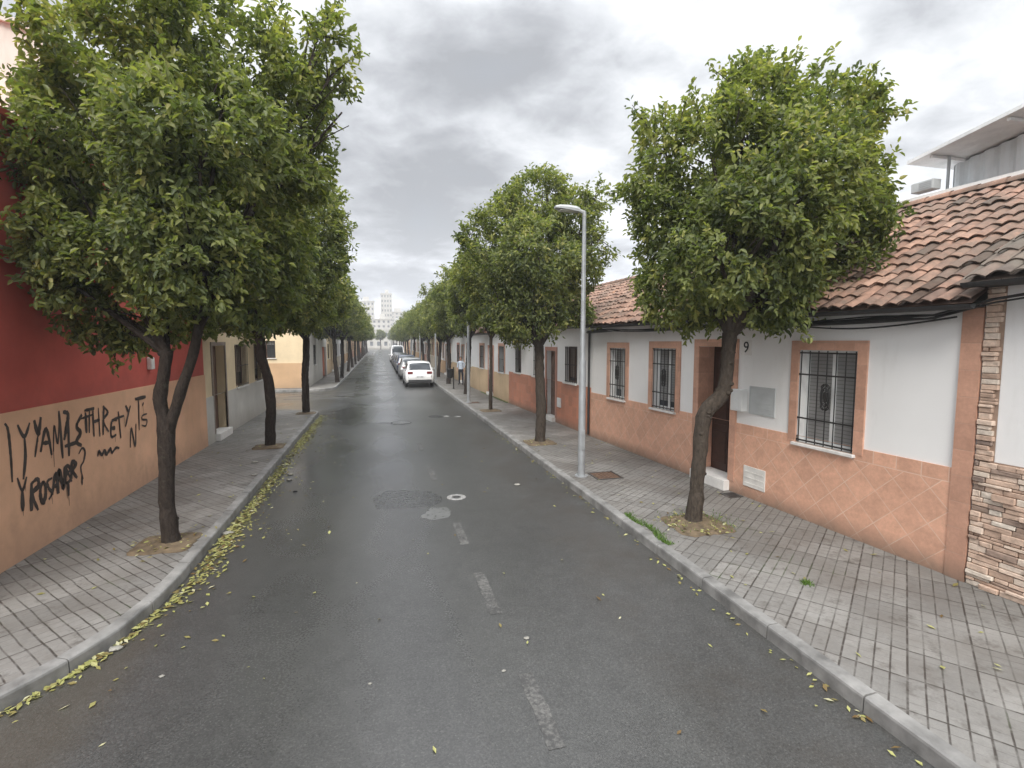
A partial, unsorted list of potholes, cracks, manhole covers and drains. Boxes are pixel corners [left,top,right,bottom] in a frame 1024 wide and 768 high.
manhole cover [588,471,624,480]
